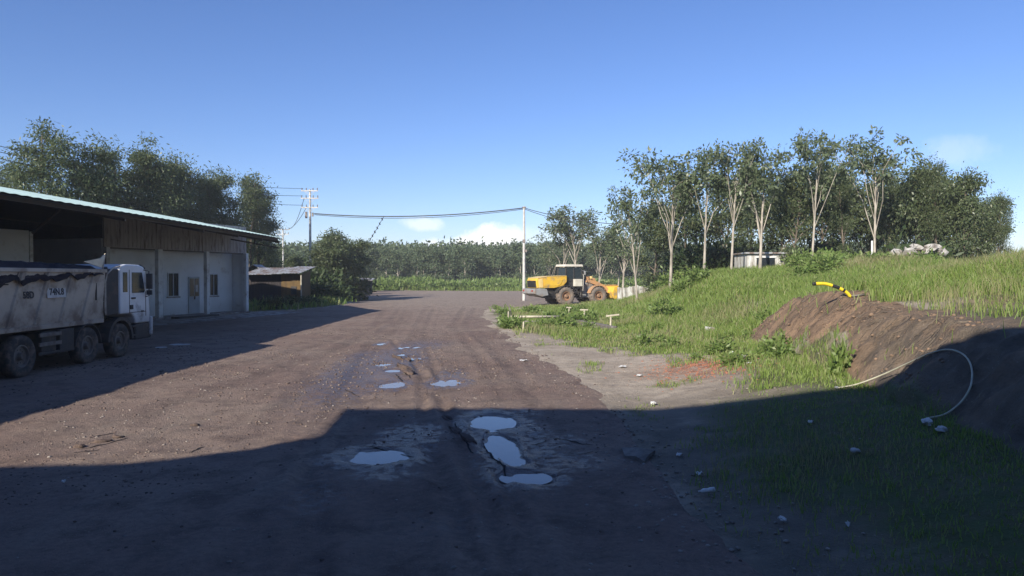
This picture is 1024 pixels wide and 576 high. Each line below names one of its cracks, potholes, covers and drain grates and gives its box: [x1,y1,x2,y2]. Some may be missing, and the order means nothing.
pothole [482,432,529,467]
pothole [497,469,555,485]
pothole [430,378,463,387]
pothole [467,414,519,432]
pothole [342,449,409,465]
